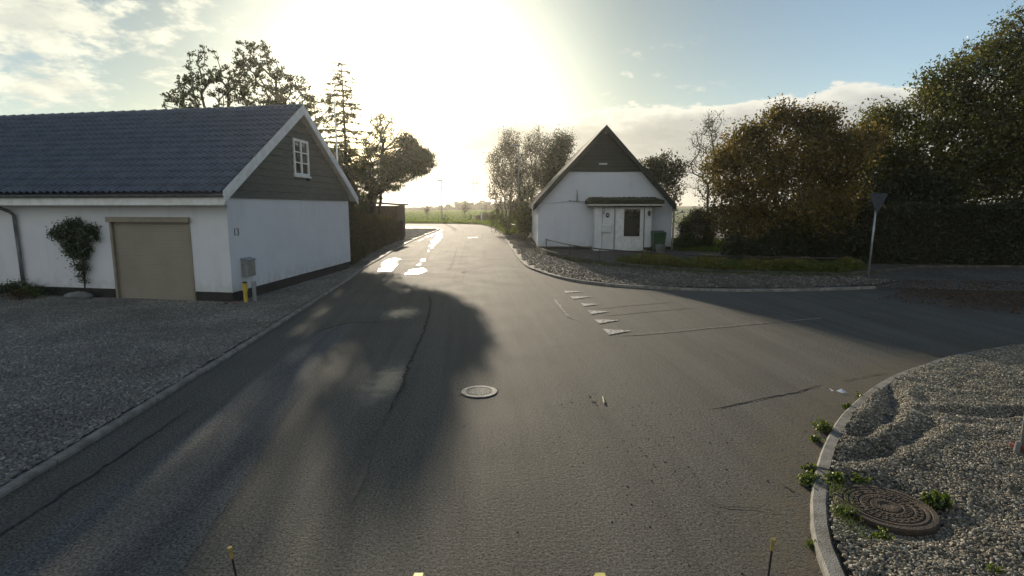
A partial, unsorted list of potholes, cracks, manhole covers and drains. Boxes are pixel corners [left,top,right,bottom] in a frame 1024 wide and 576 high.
crack [711,373,883,409]
manhole cover [835,485,941,537]
manhole cover [460,385,499,398]
